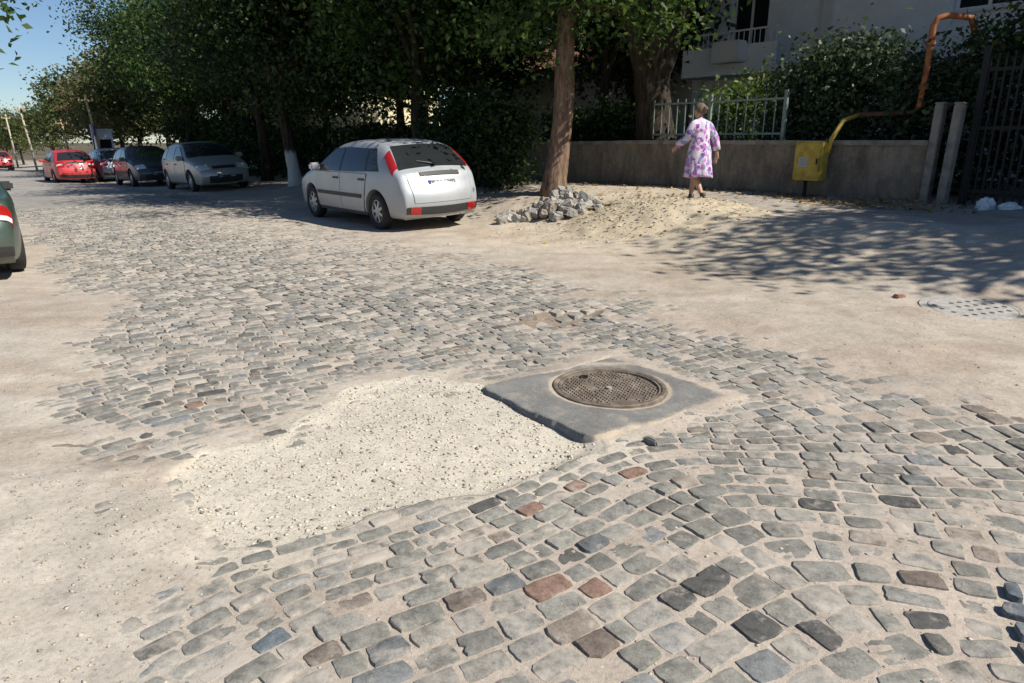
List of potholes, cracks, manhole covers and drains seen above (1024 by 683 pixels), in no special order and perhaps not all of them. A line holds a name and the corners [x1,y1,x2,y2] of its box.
pothole [514,308,607,329]
manhole cover [553,367,667,409]
manhole cover [918,295,1024,320]
